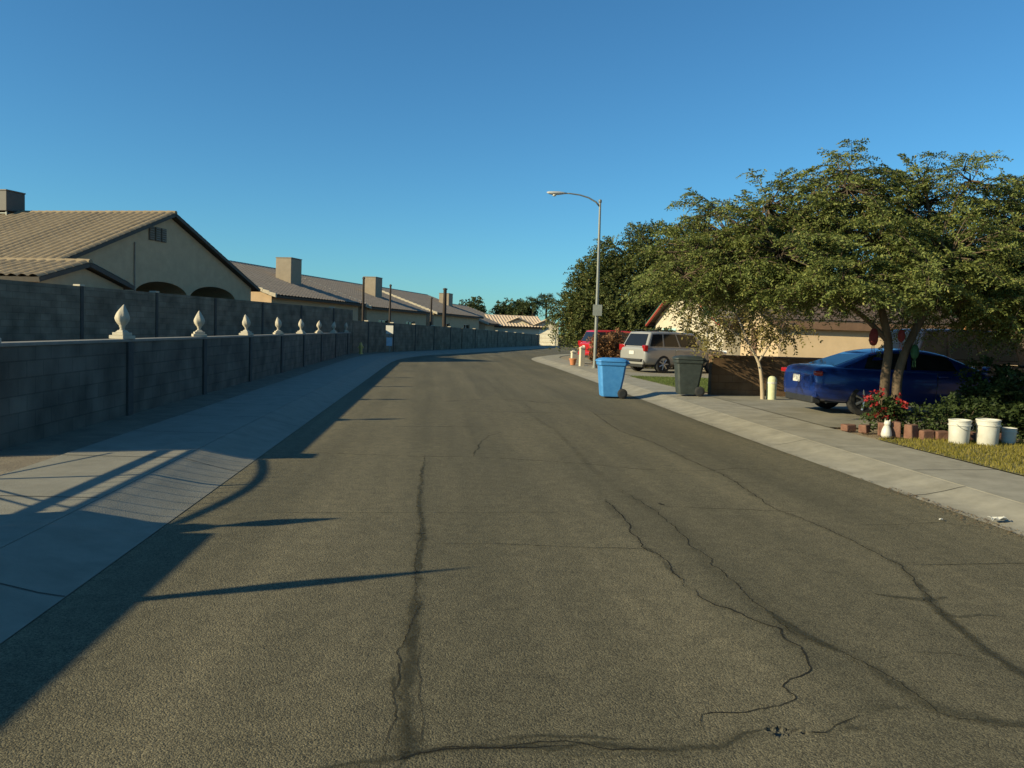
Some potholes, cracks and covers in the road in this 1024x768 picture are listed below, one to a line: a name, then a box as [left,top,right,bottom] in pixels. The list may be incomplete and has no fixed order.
pothole [765,725,808,737]
crack [469,502,812,734]
